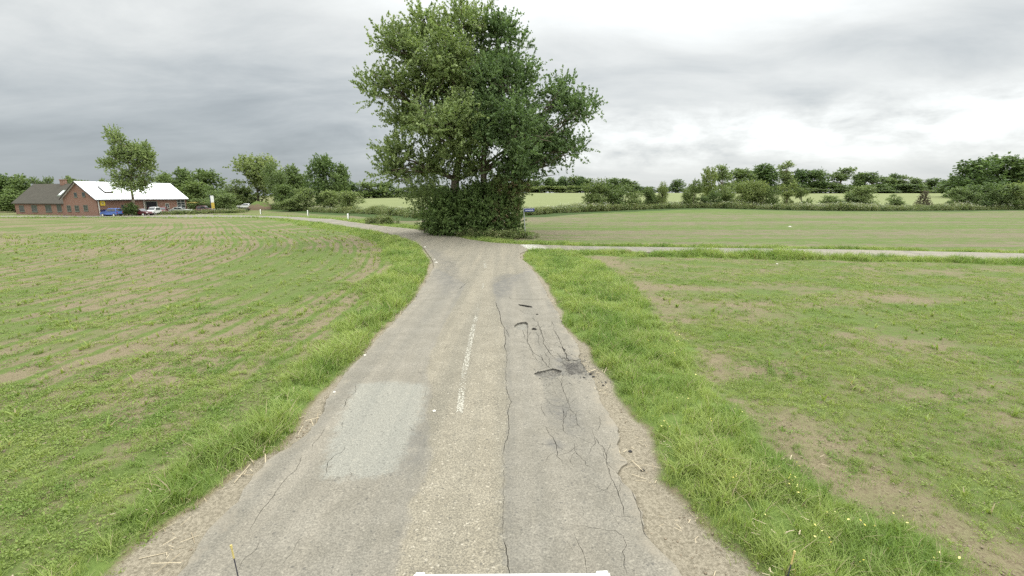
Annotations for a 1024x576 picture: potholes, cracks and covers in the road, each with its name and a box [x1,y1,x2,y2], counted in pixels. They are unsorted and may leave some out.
pothole [560,357,593,375]
crack [509,297,649,573]
pothole [534,368,562,380]
crack [240,432,352,571]
